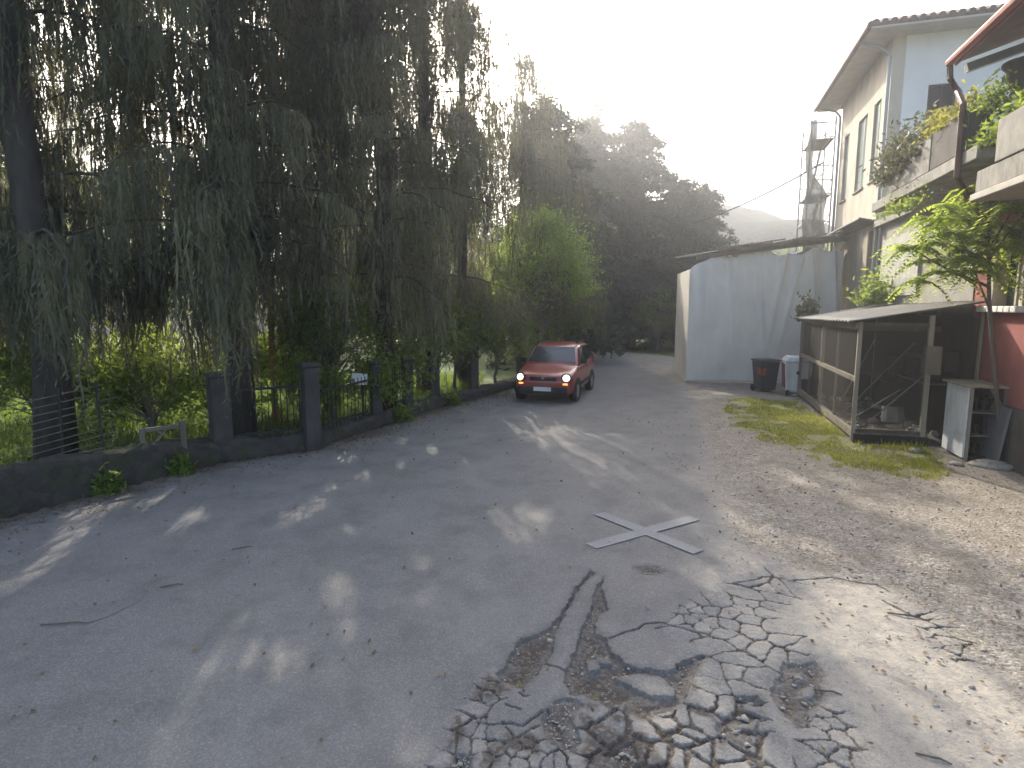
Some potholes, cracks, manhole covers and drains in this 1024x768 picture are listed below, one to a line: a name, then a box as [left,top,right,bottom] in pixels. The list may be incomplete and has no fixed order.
crack [423,566,979,768]
pothole [495,570,595,689]
pothole [563,576,706,721]
